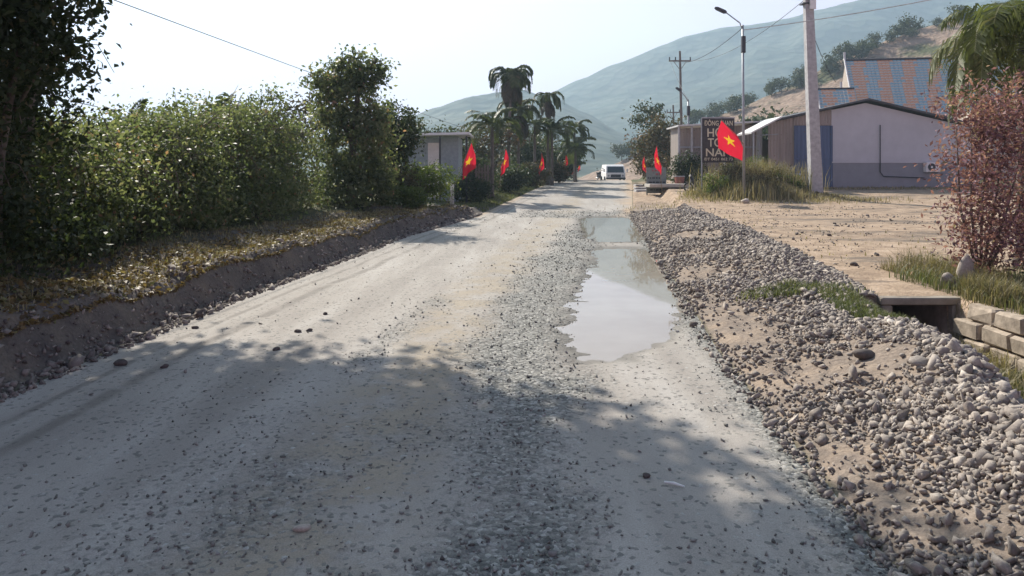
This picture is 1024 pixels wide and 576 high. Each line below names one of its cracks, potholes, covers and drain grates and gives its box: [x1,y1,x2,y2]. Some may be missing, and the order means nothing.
pothole [549,245,686,365]
pothole [576,216,647,243]
